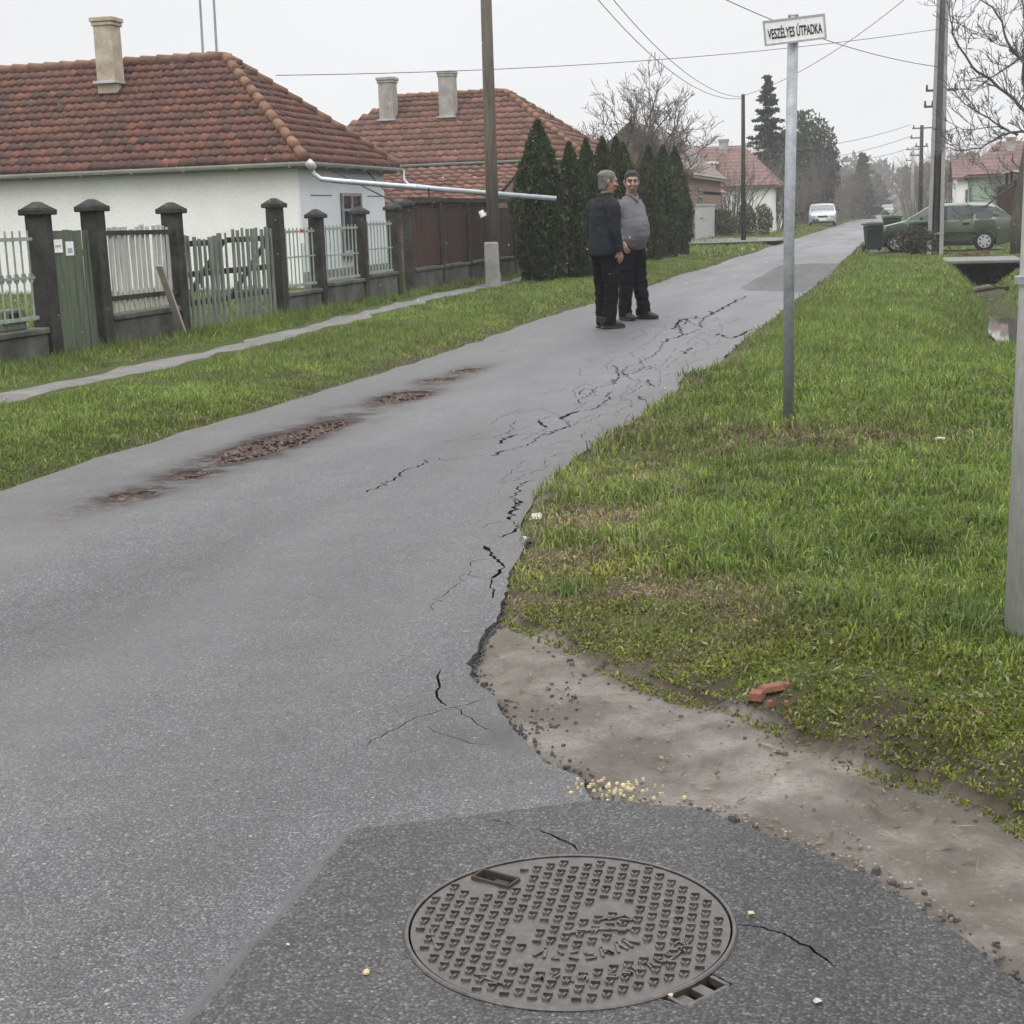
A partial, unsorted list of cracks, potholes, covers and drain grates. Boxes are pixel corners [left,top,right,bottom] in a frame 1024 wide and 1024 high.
pothole [211,420,349,463]
manhole cover [404,854,738,1012]
pothole [170,471,212,480]
pothole [106,491,157,501]
crack [366,300,736,537]
pothole [373,391,435,403]
